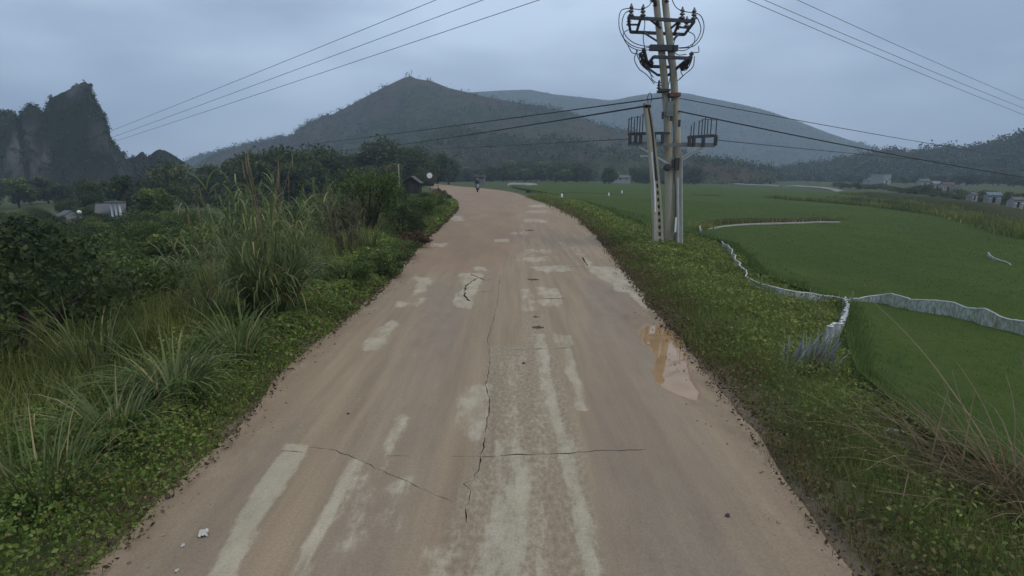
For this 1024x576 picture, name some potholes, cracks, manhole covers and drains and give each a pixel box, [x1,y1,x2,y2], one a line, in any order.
crack [293,447,455,503]
pothole [637,325,701,402]
crack [463,275,501,521]
